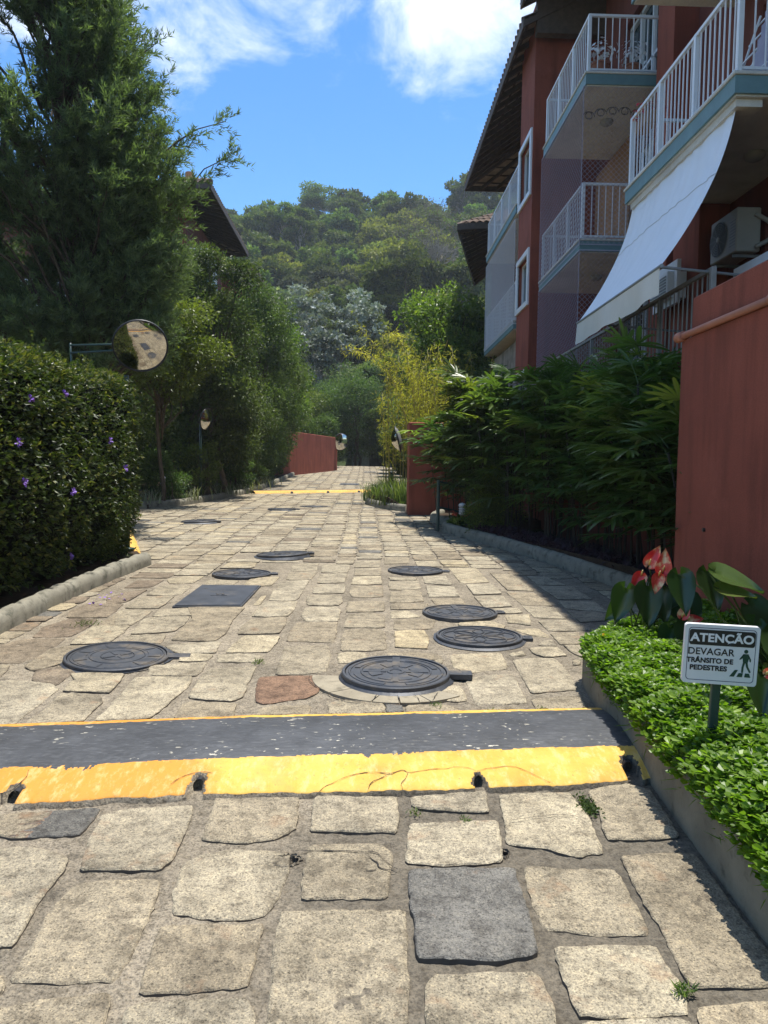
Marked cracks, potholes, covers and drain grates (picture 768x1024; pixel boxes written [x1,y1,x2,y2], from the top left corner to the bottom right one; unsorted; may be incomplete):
manhole cover [60,641,191,673]
manhole cover [433,626,533,651]
crack [318,767,476,793]
manhole cover [172,585,261,608]
manhole cover [388,566,450,576]
manhole cover [422,604,505,623]
manhole cover [212,569,278,580]
manhole cover [254,550,314,561]
manhole cover [339,655,473,697]
